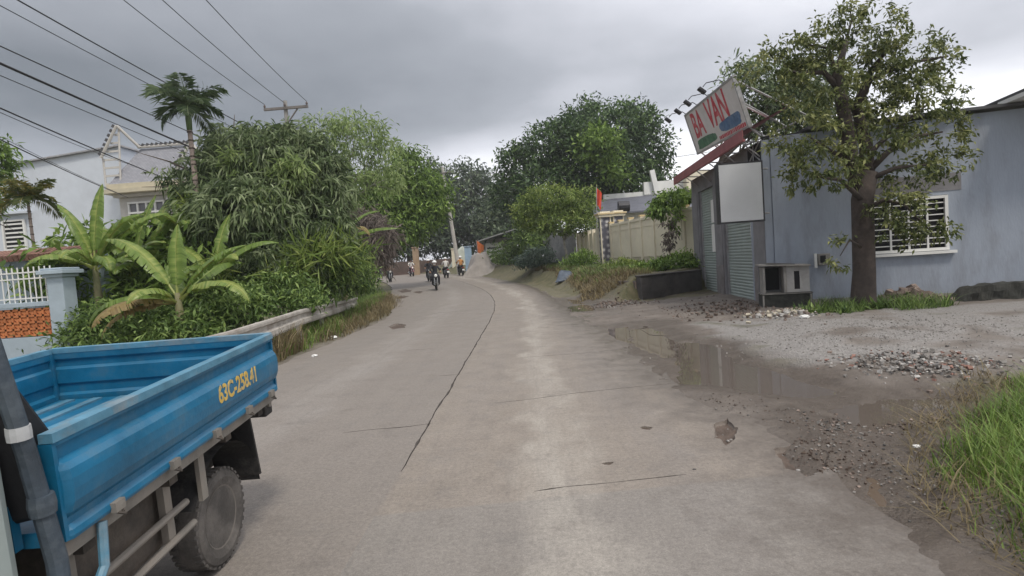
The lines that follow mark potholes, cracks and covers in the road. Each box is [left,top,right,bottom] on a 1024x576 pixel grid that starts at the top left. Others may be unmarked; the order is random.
pothole [713,418,738,445]
crack [344,282,495,471]
